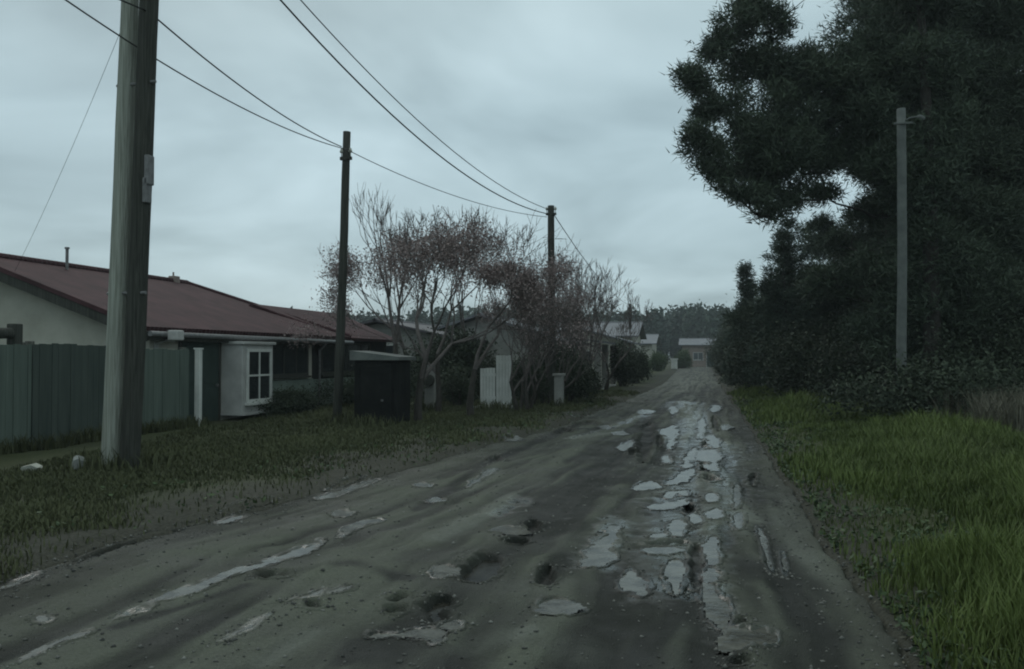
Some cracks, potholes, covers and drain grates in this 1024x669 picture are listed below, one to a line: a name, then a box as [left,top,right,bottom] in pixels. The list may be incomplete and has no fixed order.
pothole [487,524,533,537]
pothole [294,596,329,611]
pothole [520,518,548,534]
pothole [498,536,536,546]
pothole [374,588,414,618]
pothole [528,594,593,618]
pothole [246,567,296,580]
pothole [454,548,514,584]
pothole [410,592,463,626]
pothole [360,625,449,646]
pothole [436,620,467,633]
pothole [531,563,565,588]
